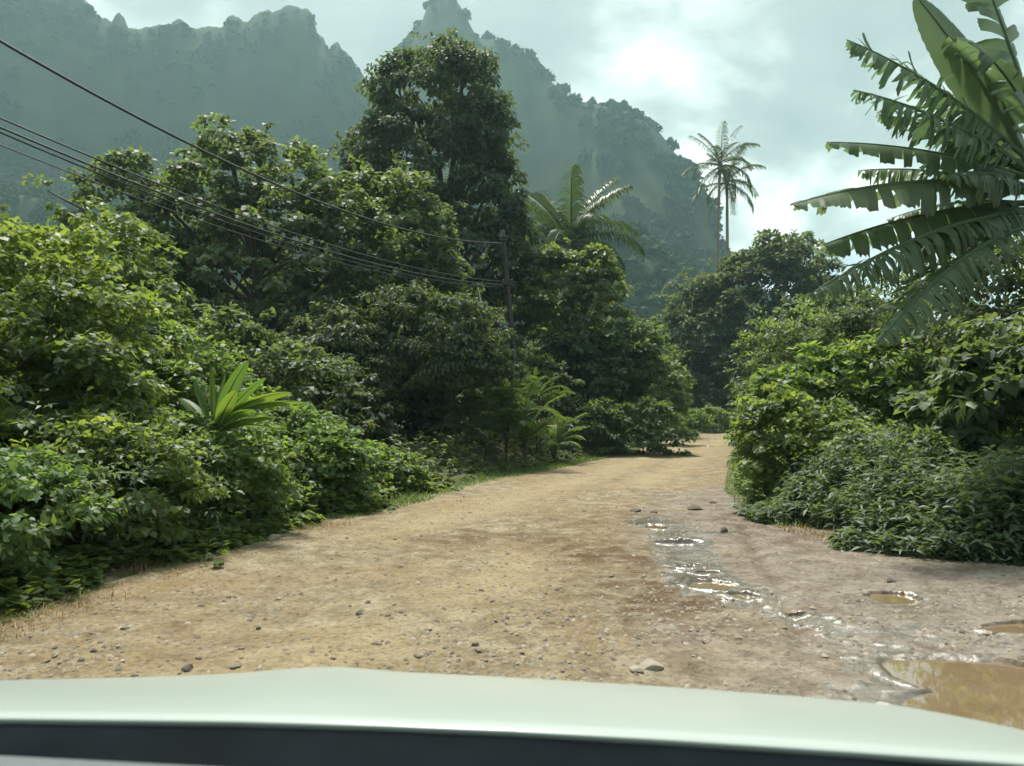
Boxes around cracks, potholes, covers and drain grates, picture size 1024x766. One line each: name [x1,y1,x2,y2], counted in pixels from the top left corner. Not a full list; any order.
pothole [774,606,818,621]
pothole [852,588,934,608]
pothole [967,616,1024,636]
pothole [677,577,753,592]
pothole [715,588,770,602]
pothole [643,538,712,546]
pothole [862,650,1024,730]
